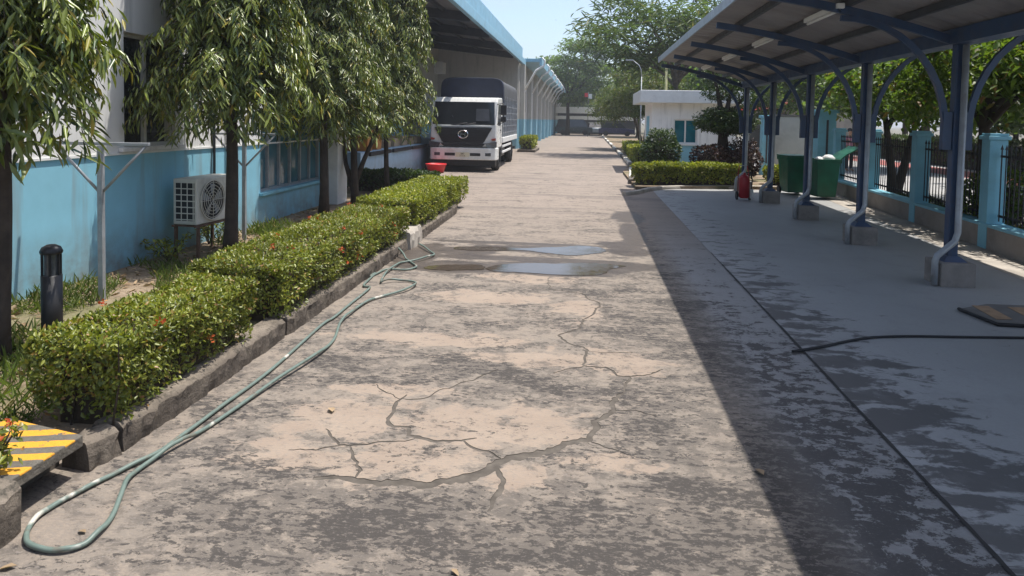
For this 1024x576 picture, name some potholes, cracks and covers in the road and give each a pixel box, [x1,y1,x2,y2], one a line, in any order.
crack [295,277,664,511]
